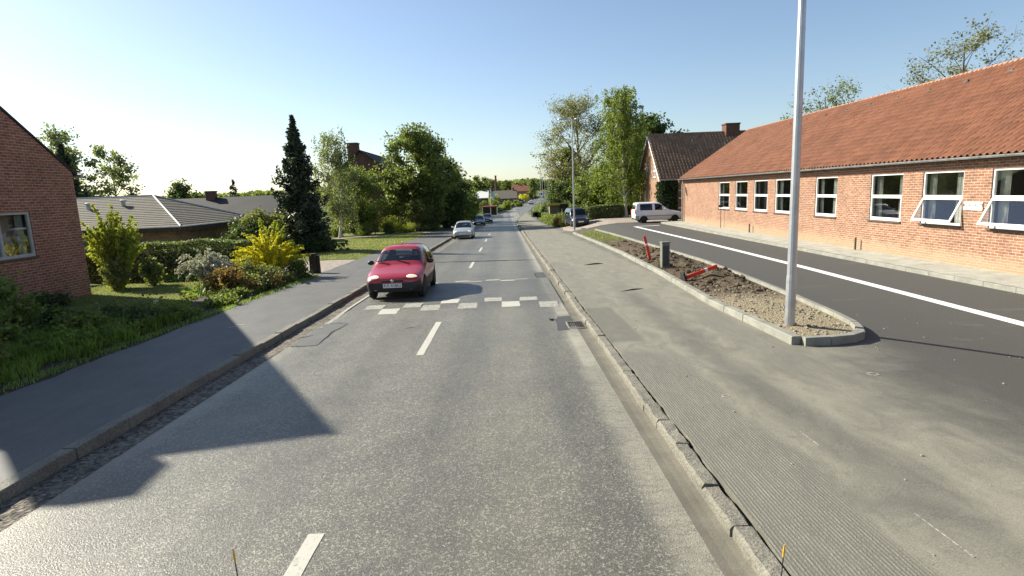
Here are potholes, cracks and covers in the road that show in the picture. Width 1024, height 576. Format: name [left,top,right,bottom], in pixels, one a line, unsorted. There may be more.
drain grate [566,321,587,329]
